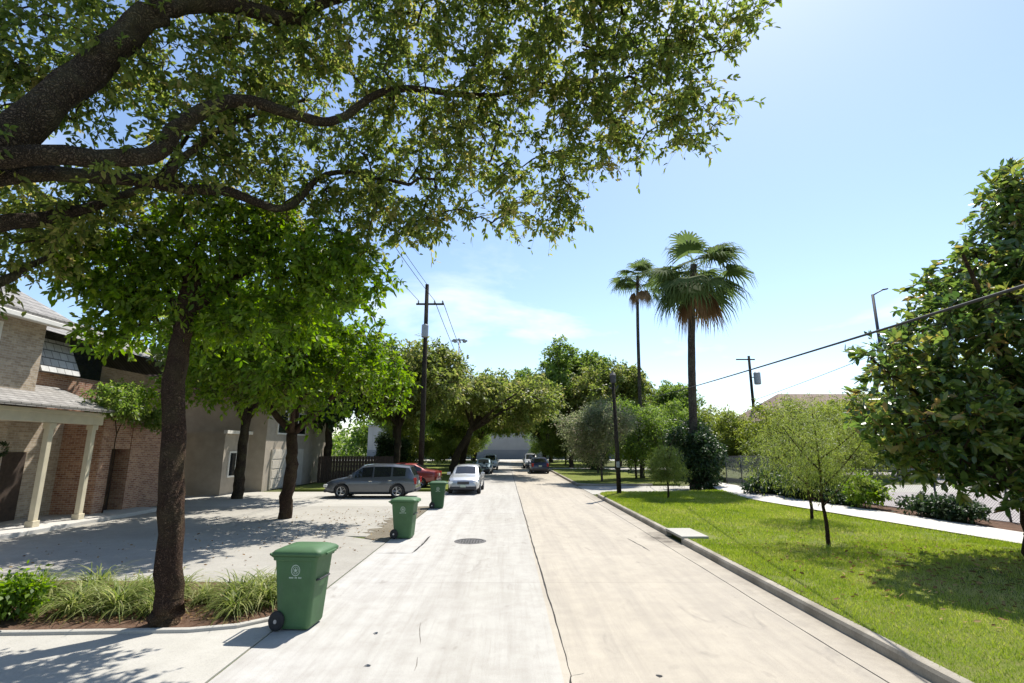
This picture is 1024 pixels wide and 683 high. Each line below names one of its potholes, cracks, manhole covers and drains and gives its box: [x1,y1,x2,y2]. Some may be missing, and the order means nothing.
drain grate [665,528,709,544]
